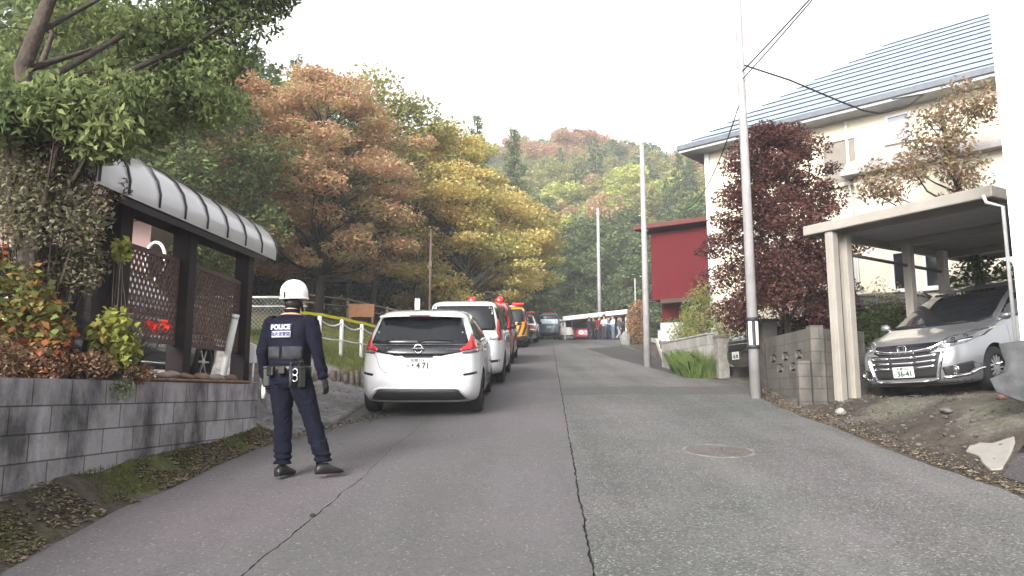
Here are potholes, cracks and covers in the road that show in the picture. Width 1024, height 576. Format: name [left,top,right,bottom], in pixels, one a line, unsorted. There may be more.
manhole cover [682,444,756,458]
crack [241,414,433,576]
